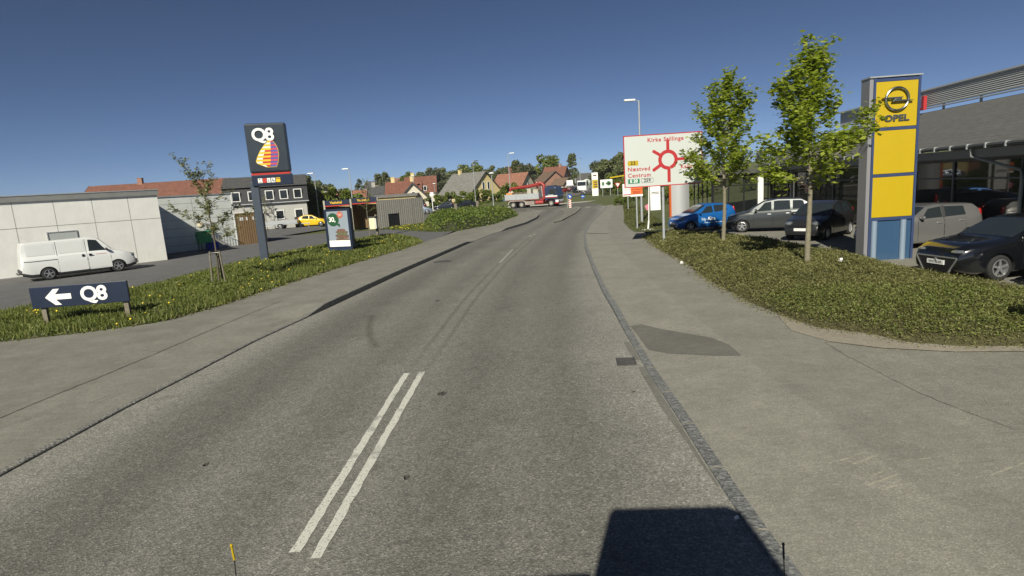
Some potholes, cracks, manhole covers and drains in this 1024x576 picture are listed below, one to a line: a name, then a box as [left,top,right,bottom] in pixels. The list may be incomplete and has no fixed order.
drain grate [616,357,637,366]
